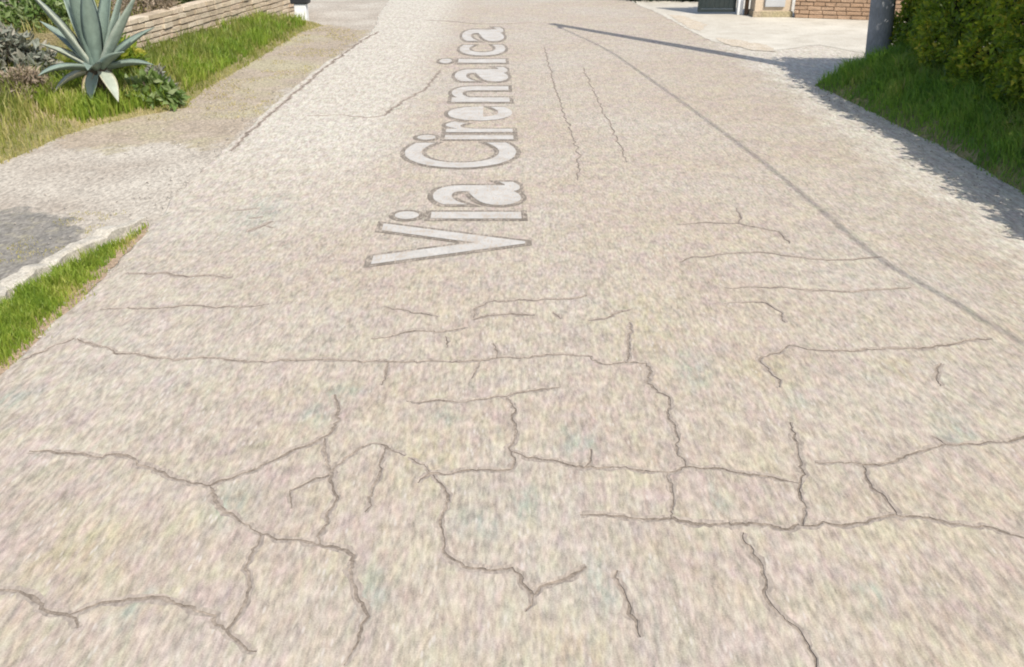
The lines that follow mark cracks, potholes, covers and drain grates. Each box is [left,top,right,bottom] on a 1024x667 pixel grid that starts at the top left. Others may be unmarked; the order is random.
crack [0,285,1024,667]
crack [233,207,275,233]
crack [543,47,627,180]
crack [229,32,442,151]
crack [124,271,234,279]
crack [677,208,883,263]
